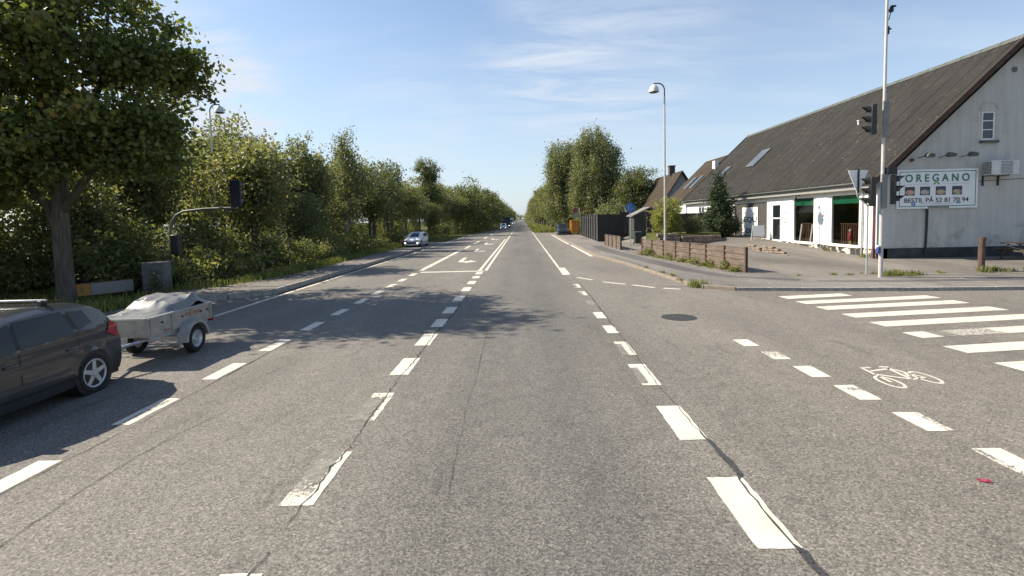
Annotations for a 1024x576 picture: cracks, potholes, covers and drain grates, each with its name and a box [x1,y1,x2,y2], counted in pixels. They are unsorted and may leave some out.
crack [287,289,471,523]
